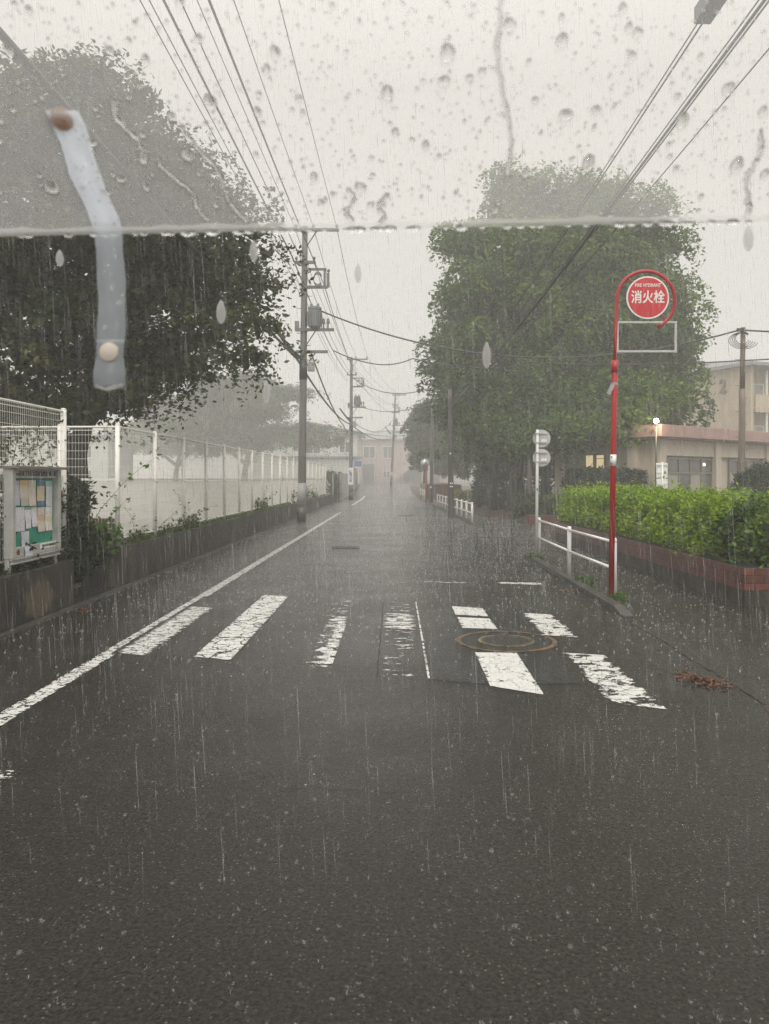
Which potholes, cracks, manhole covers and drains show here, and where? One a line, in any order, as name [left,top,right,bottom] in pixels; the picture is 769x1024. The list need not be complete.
manhole cover [456,631,557,653]
